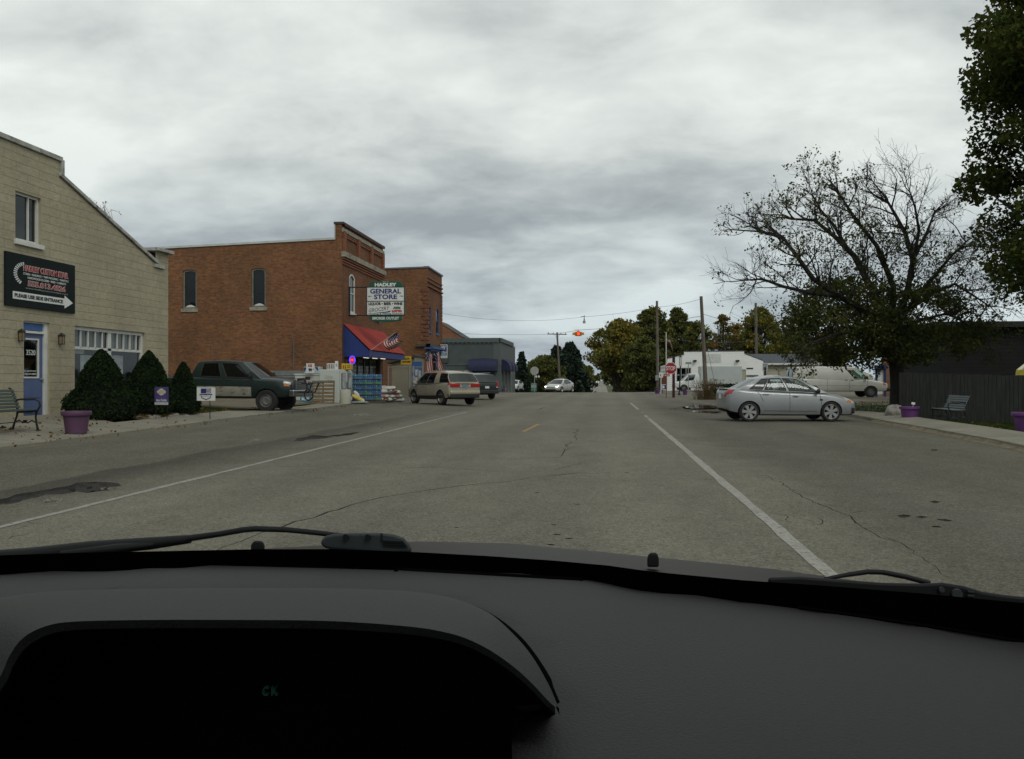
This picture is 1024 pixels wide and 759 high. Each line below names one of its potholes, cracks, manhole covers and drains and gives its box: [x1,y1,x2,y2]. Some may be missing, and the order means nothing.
crack [768,476,958,581]
